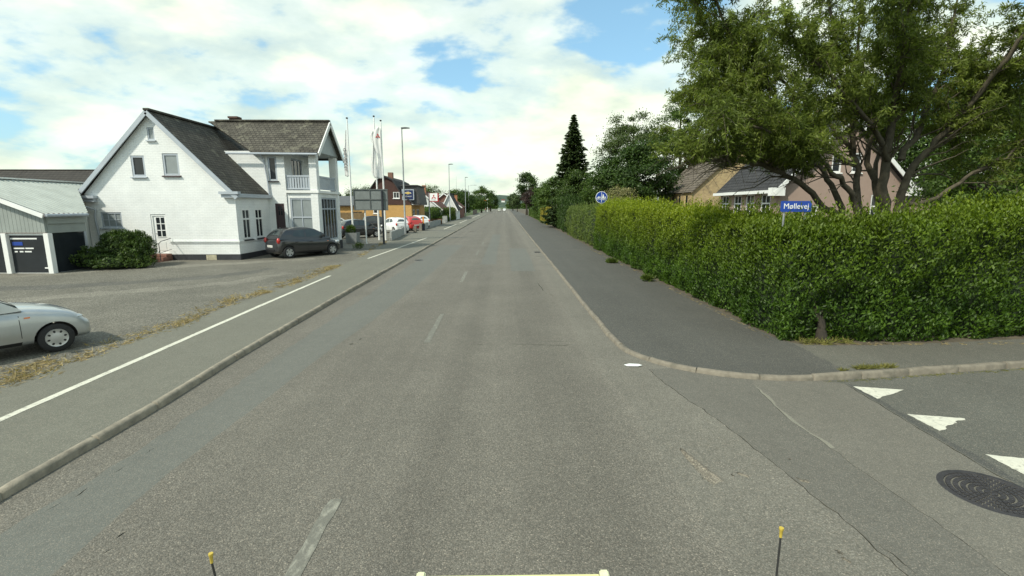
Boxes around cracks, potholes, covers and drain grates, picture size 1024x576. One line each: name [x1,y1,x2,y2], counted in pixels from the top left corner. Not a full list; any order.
manhole cover [936,470,1024,518]
